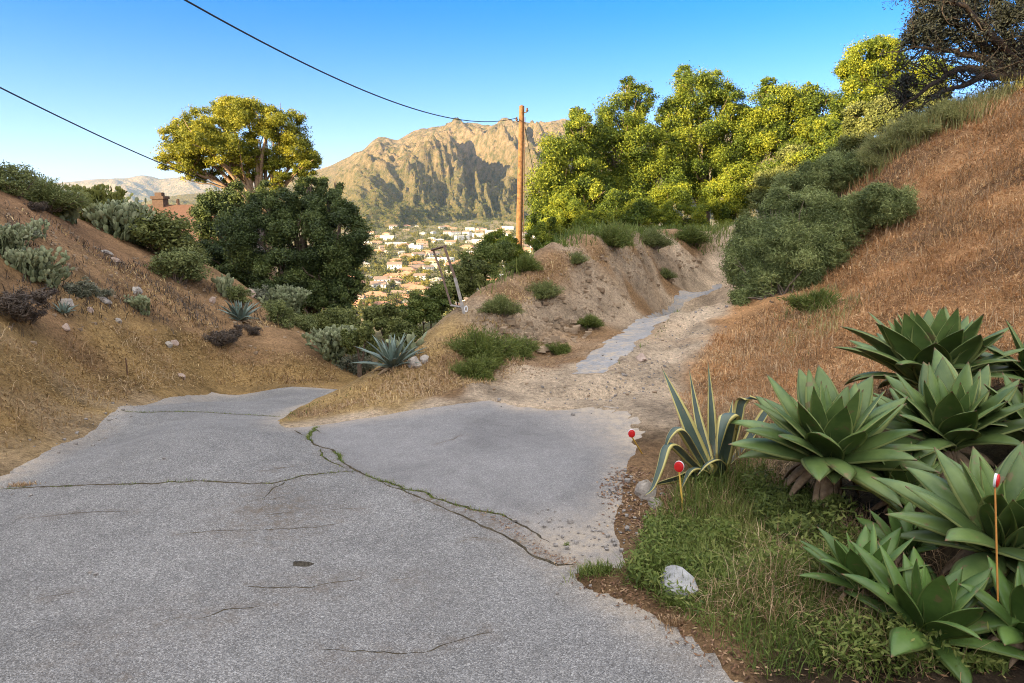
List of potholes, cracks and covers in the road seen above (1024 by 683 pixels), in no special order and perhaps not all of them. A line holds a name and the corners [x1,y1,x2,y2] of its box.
crack [325,633,484,654]
crack [247,578,358,588]
crack [11,467,351,534]
